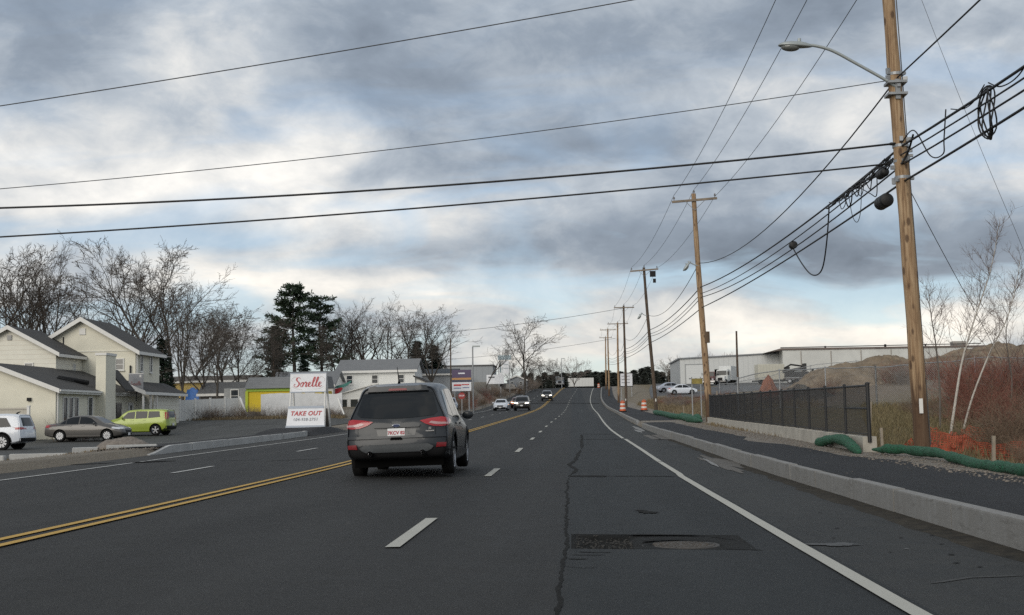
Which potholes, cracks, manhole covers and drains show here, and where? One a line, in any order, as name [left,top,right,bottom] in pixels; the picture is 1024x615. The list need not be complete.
manhole cover [642,541,720,549]
crack [554,435,606,615]
